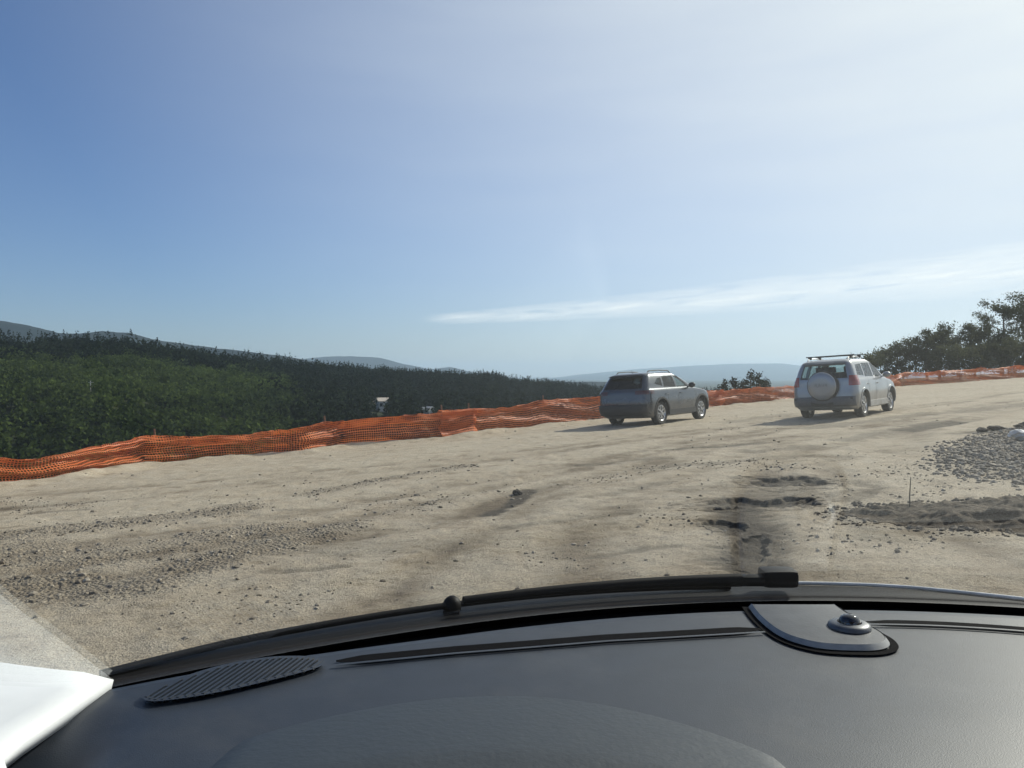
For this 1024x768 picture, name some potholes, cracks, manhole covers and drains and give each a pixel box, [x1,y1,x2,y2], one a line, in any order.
pothole [729,472,861,493]
pothole [693,518,762,539]
pothole [665,494,860,514]
